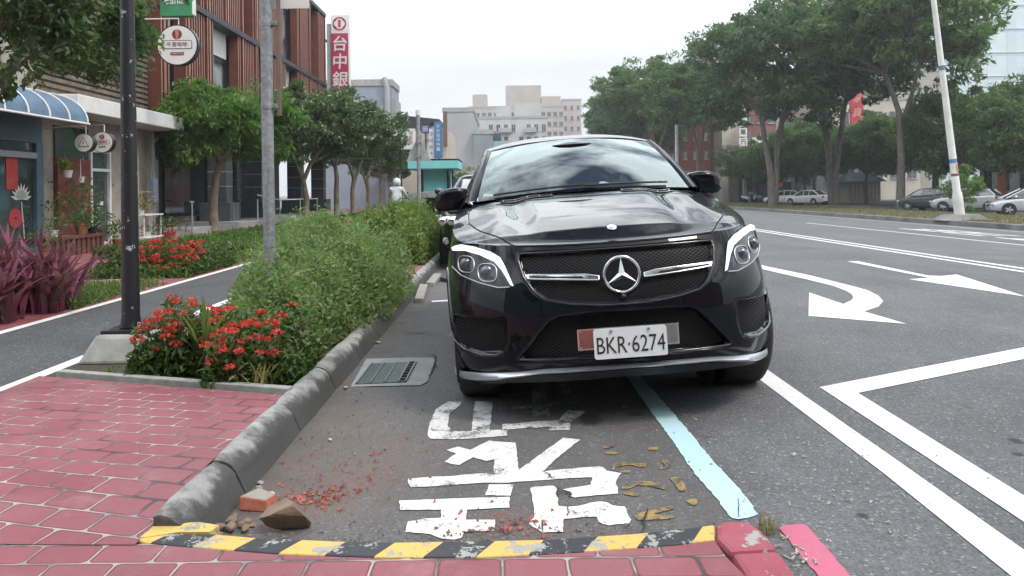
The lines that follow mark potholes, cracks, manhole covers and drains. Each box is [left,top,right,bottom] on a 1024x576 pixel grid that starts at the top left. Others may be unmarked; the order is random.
drain grate [351,357,435,387]
